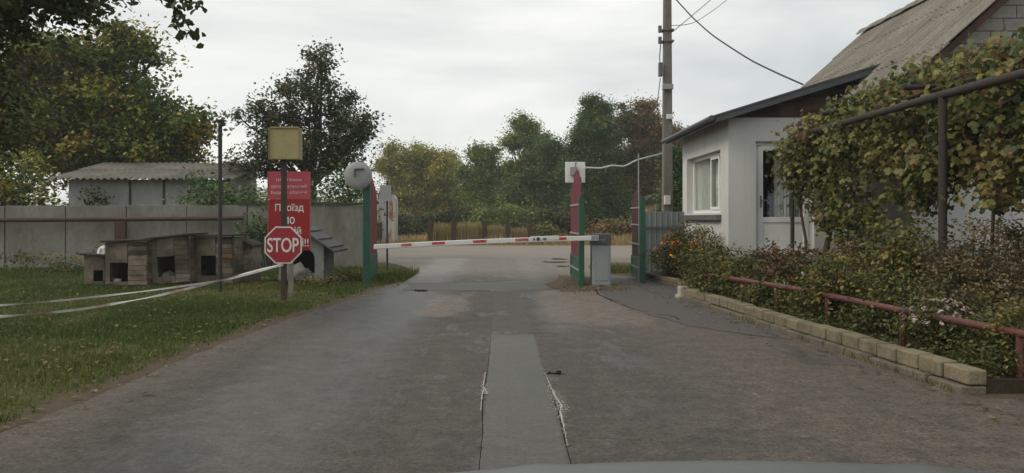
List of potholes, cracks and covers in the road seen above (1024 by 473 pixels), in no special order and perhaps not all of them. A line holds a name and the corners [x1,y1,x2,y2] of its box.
crack [545,373,574,463]
crack [478,341,491,469]
